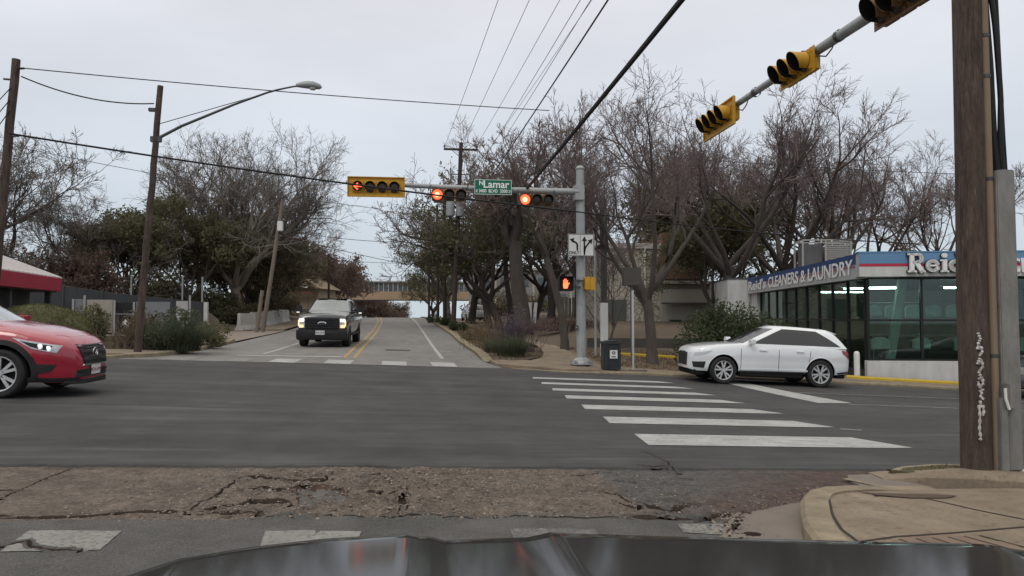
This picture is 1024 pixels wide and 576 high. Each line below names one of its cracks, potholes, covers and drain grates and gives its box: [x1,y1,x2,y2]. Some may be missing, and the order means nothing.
crack [564,451,752,538]
crack [0,471,408,553]
